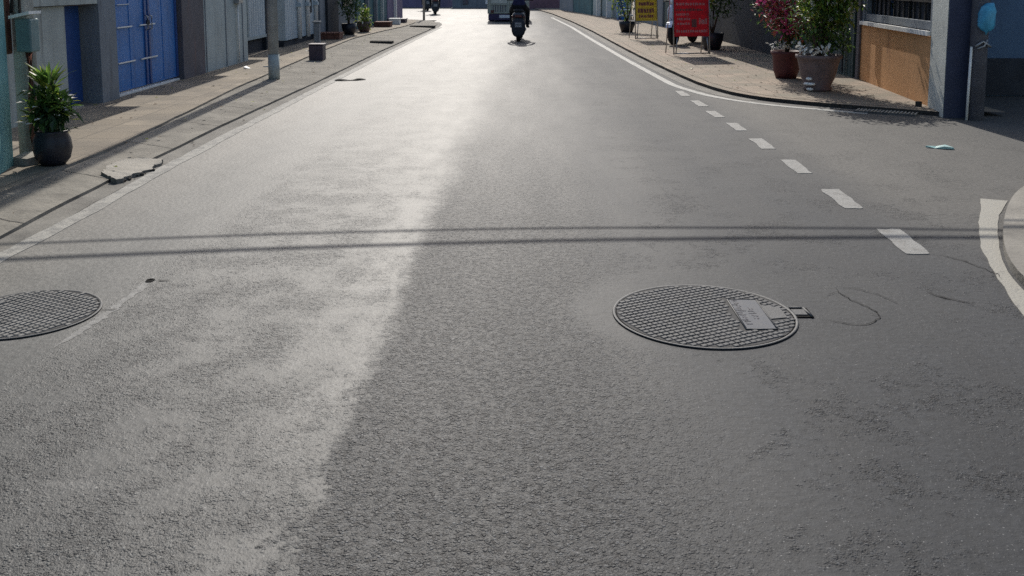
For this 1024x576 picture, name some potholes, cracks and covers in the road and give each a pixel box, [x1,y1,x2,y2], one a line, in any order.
drain grate [853,108,918,117]
crack [819,287,896,324]
manhole cover [612,285,814,349]
manhole cover [0,290,103,340]
